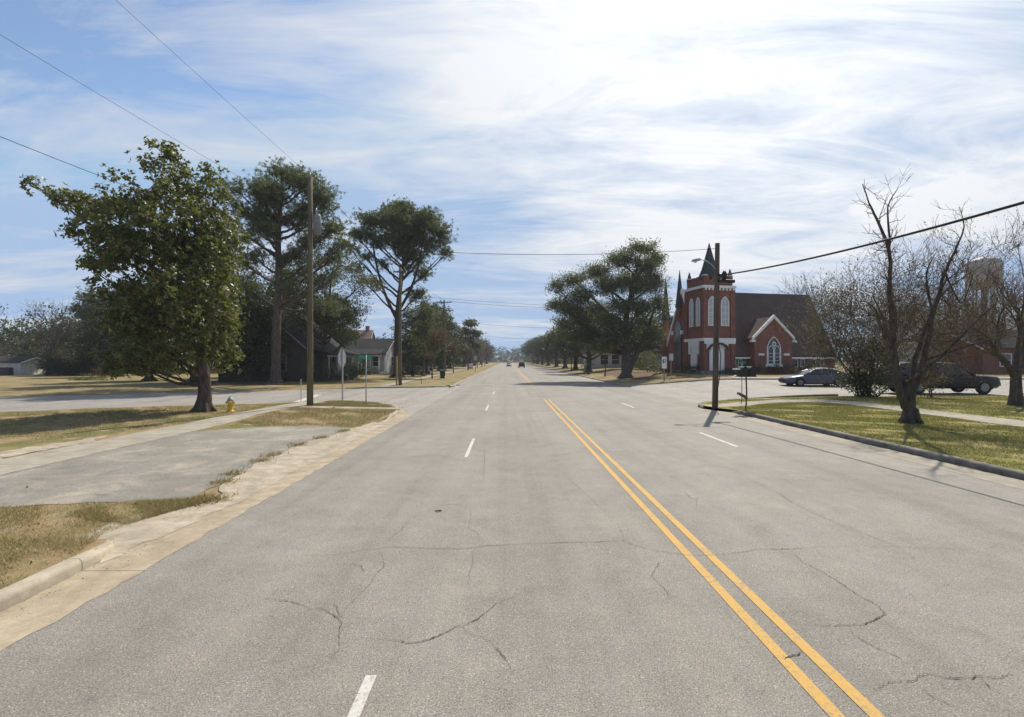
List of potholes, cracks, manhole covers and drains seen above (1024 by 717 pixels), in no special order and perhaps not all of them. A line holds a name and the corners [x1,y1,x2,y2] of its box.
crack [269,478,1021,708]
